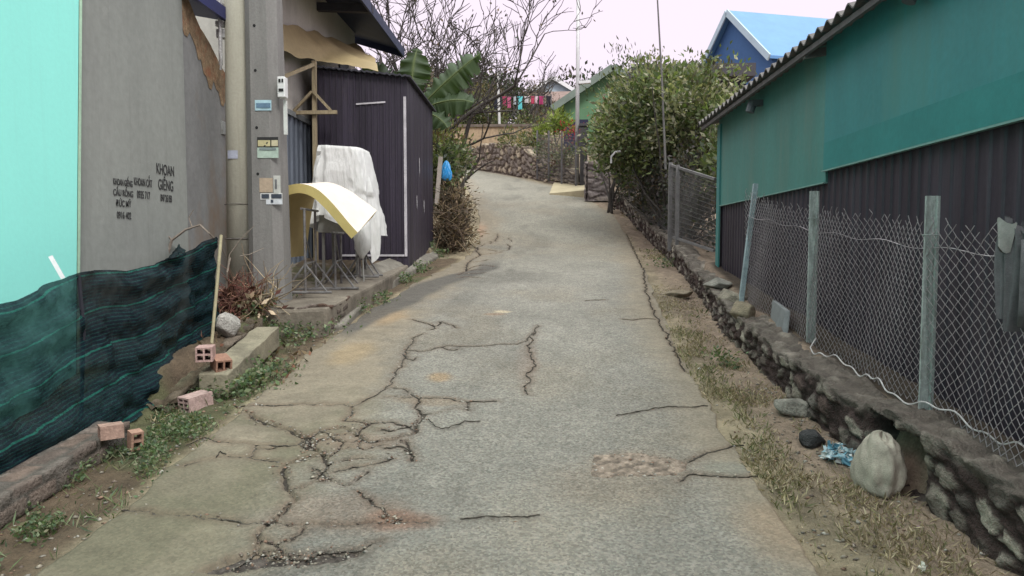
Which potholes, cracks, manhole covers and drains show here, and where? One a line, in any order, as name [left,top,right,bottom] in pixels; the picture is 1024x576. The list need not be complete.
crack [122,319,540,571]
crack [458,234,512,278]
crack [680,445,758,482]
crack [616,405,708,416]
crack [623,236,685,372]
